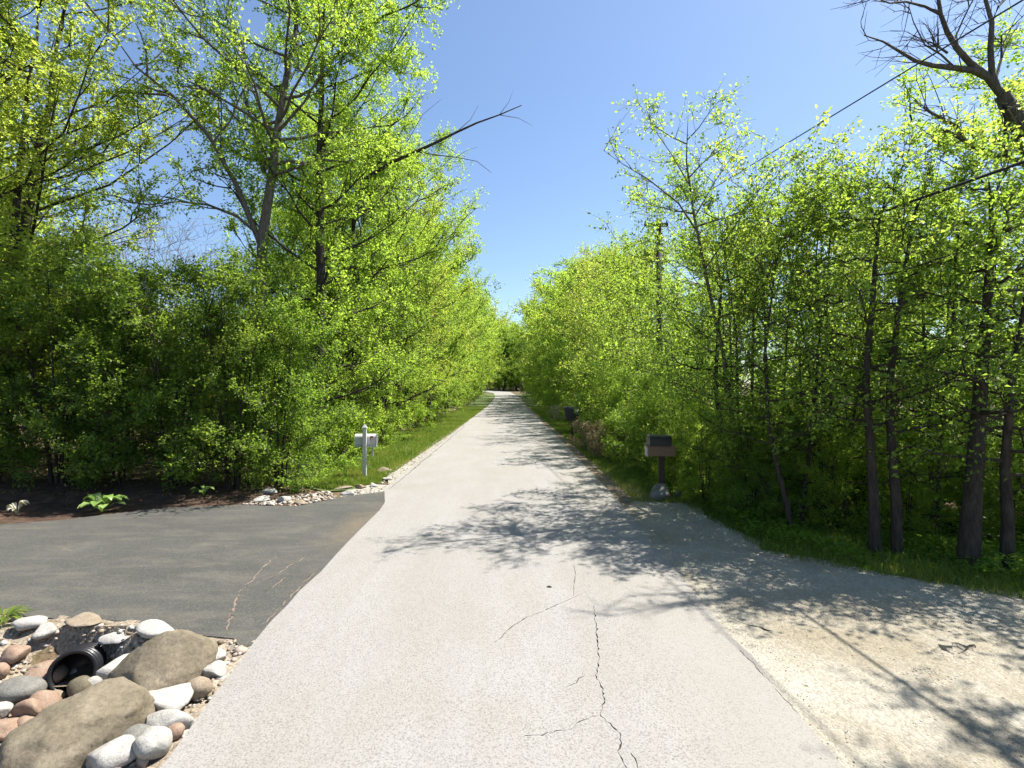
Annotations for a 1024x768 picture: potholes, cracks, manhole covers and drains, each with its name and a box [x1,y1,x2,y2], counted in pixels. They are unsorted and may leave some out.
crack [226,554,314,630]
crack [525,606,638,768]
